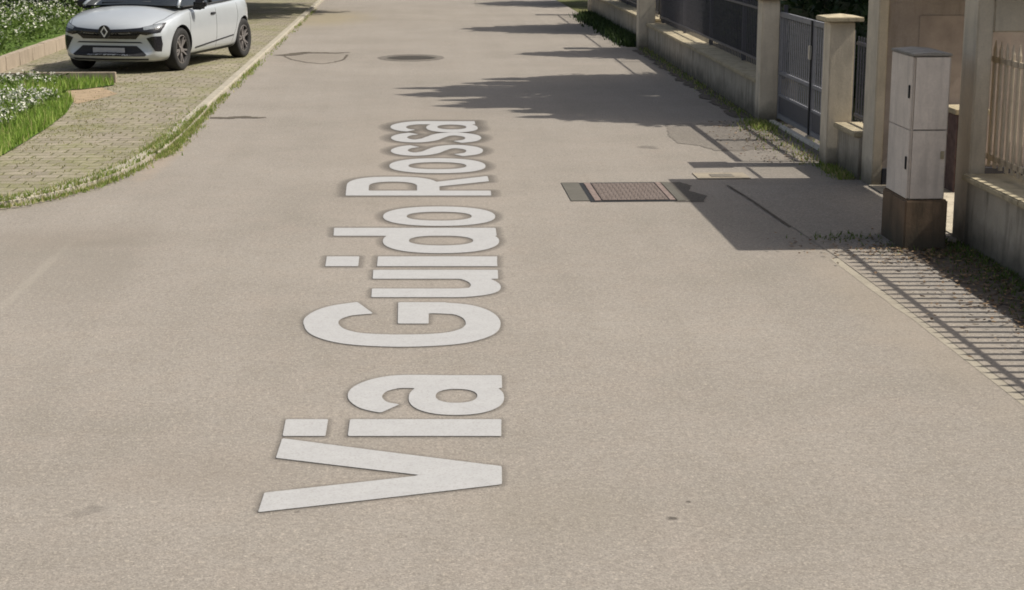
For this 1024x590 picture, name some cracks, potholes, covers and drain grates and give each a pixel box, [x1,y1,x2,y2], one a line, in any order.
manhole cover [561,182,685,202]
utility cover [692,172,751,180]
